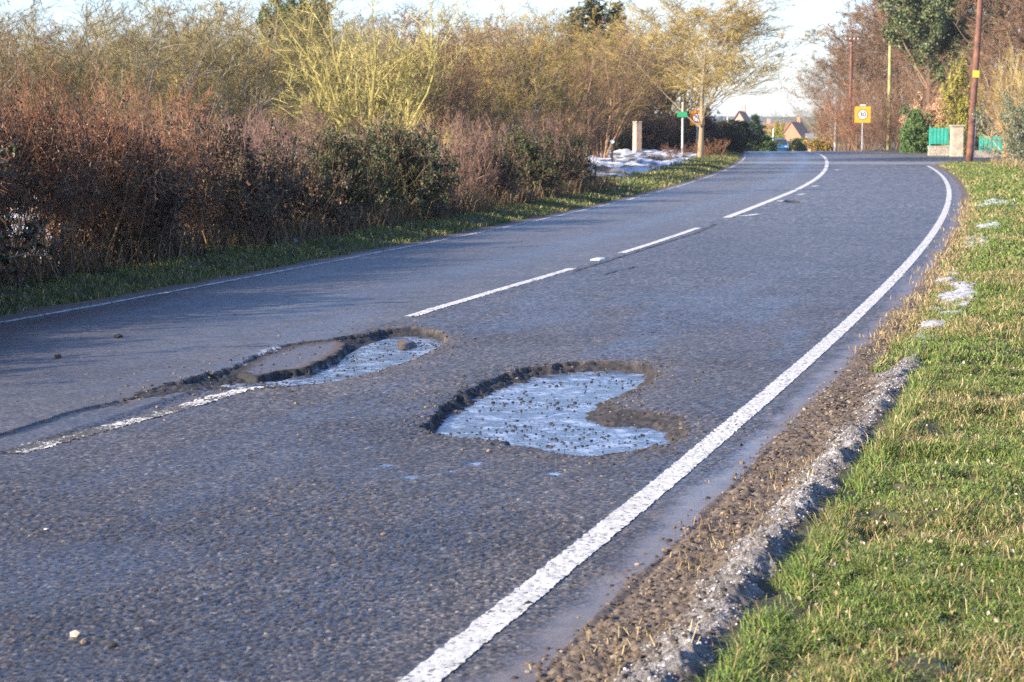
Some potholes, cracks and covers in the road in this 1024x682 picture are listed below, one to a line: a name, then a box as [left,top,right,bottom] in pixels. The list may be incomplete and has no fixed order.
pothole [417,360,692,457]
pothole [121,327,451,403]
